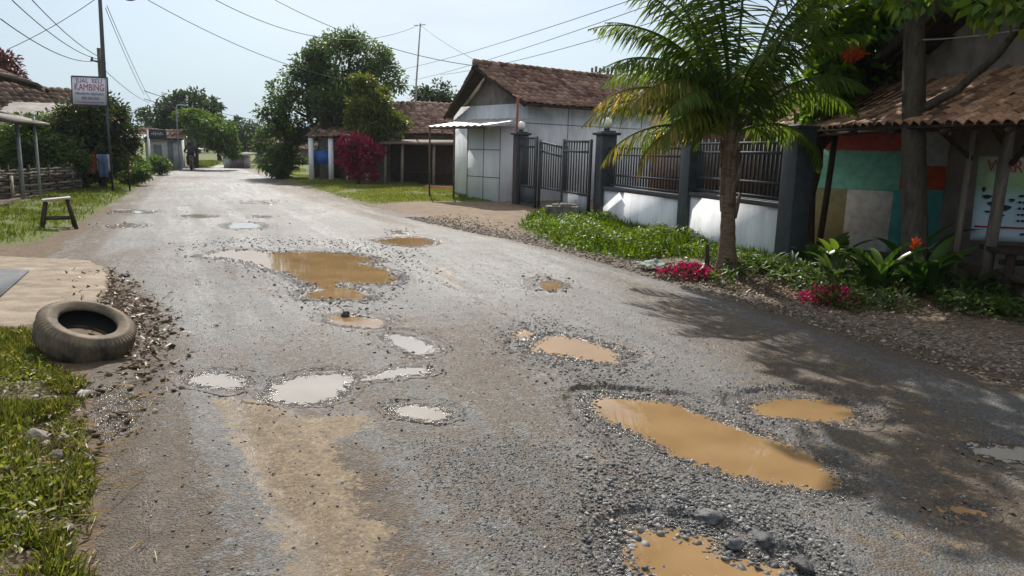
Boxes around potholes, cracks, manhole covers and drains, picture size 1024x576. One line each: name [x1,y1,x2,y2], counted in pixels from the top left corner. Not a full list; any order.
pothole [519,275,582,294]
pothole [209,221,277,230]
pothole [311,309,406,331]
pothole [498,326,656,371]
pothole [360,233,452,248]
pothole [374,397,465,427]
pothole [558,381,887,507]
pothole [585,503,840,576]
pothole [367,327,452,360]
pothole [241,366,368,409]
pothole [164,366,264,397]
pothole [947,435,1024,470]
